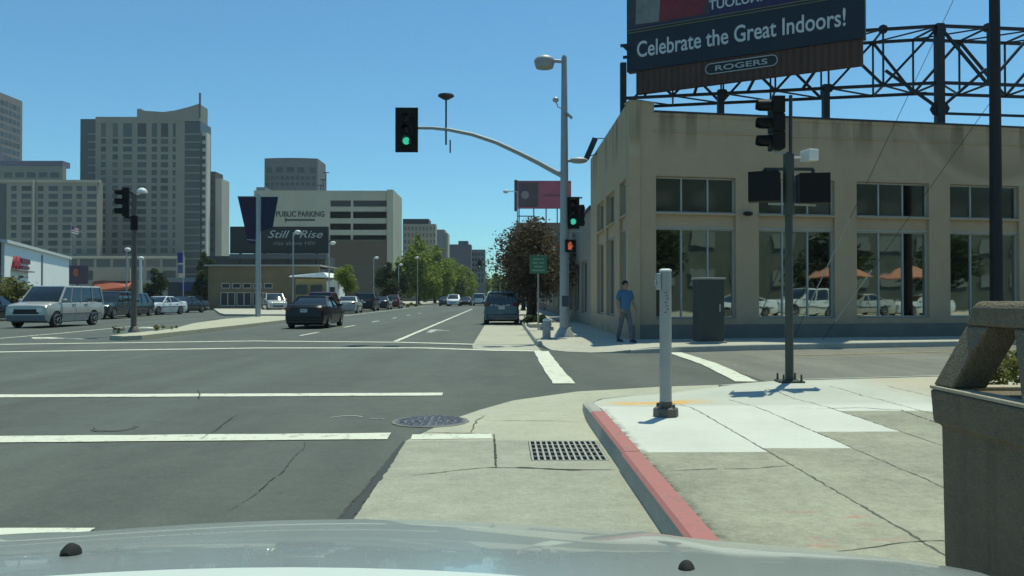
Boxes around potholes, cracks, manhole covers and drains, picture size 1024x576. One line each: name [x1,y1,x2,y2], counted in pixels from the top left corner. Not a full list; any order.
drain grate [528,441,609,461]
crack [231,442,305,509]
crack [840,540,945,551]
manhole cover [392,415,469,427]
